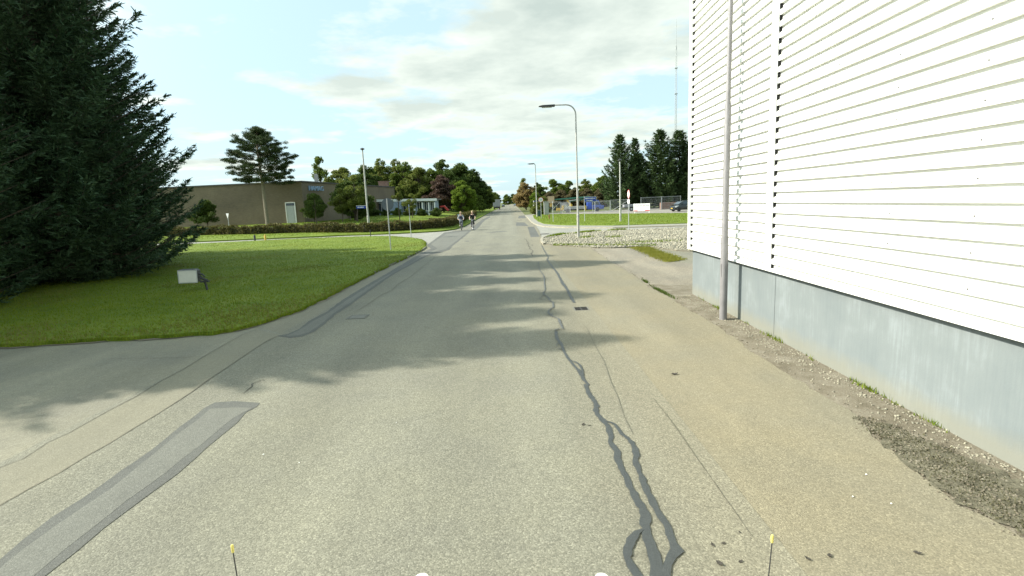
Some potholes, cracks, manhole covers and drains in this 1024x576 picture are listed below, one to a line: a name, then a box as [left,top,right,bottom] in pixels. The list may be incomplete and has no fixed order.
crack [654,399,755,539]
